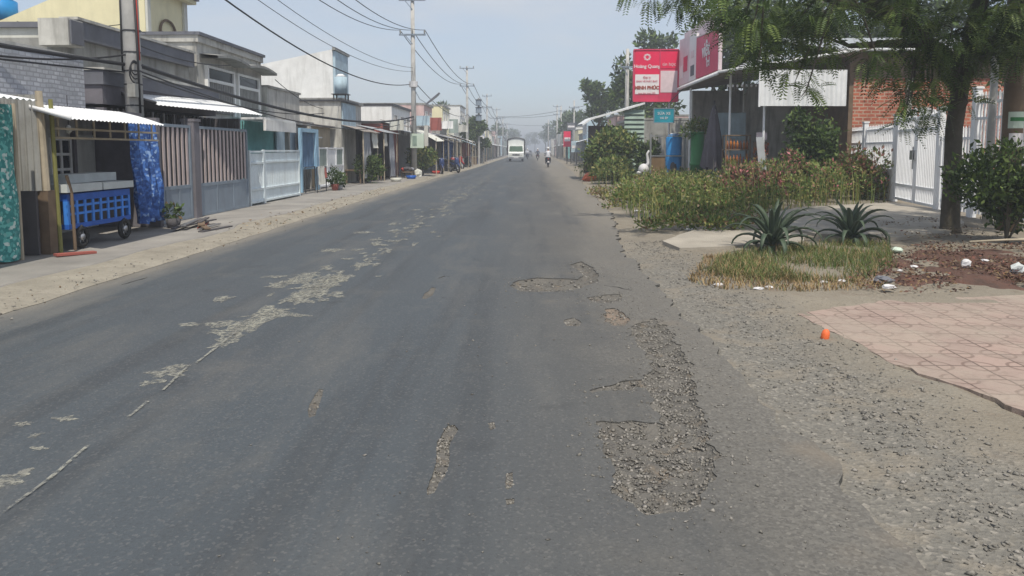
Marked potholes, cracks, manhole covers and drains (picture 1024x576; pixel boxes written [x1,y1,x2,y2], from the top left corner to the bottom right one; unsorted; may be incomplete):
pothole [603,308,630,326]
pothole [308,389,323,417]
pothole [587,294,622,303]
pothole [564,318,581,326]
pothole [590,318,722,515]
pothole [505,472,515,489]
pothole [427,425,458,495]
pothole [510,262,599,292]
